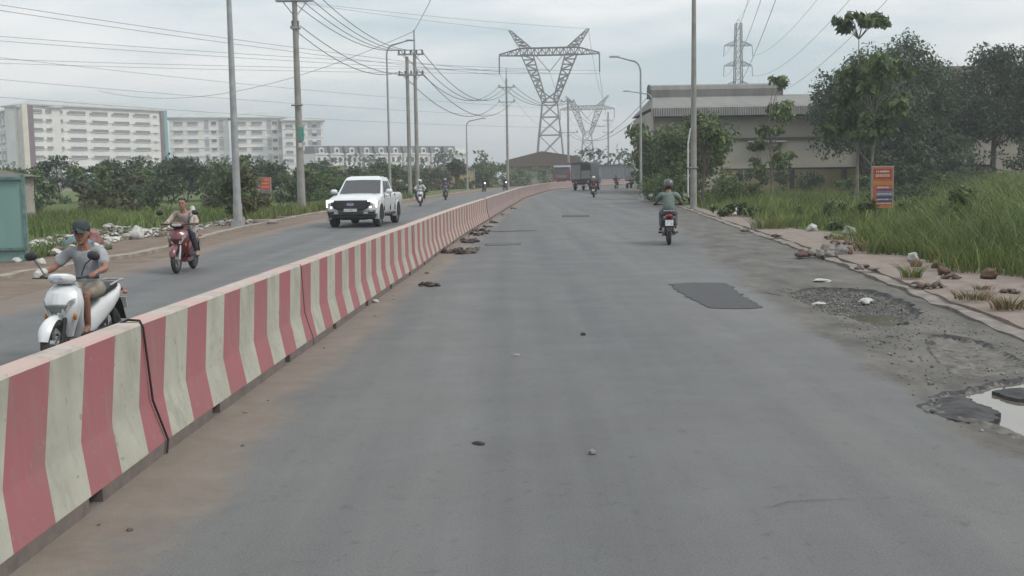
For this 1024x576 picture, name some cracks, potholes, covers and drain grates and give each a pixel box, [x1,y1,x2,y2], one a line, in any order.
pothole [924,334,1024,379]
pothole [788,287,925,326]
pothole [916,377,1024,440]
